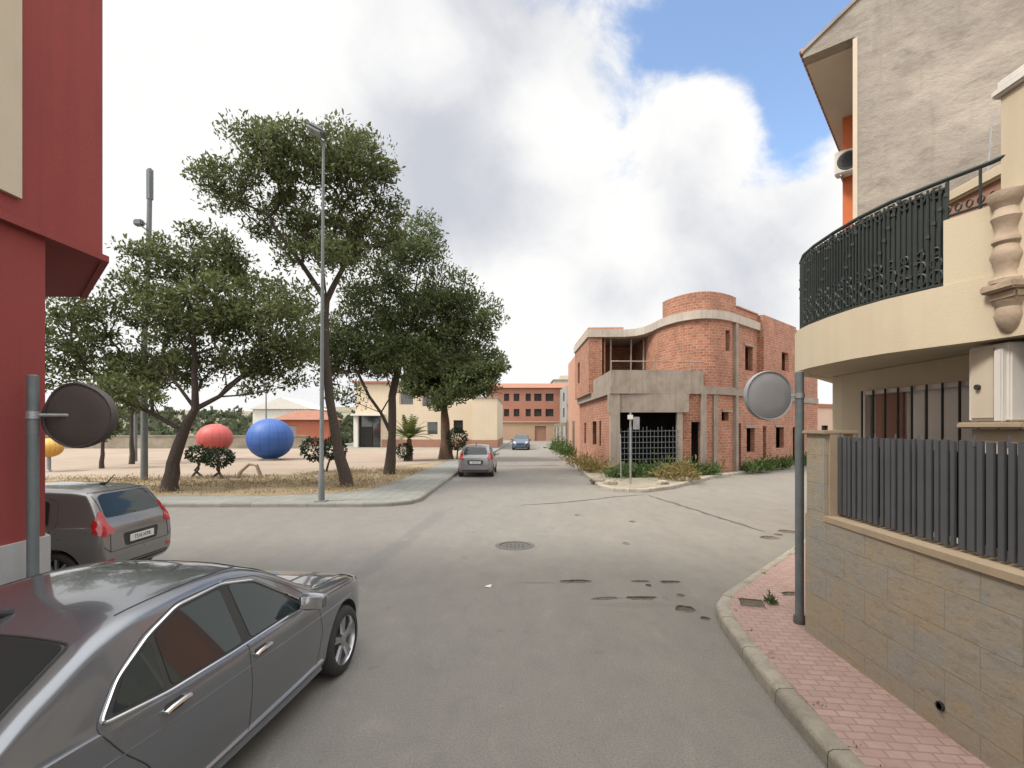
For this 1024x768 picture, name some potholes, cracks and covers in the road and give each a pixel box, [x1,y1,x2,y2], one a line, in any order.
pothole [738,598,767,609]
manhole cover [495,541,535,550]
